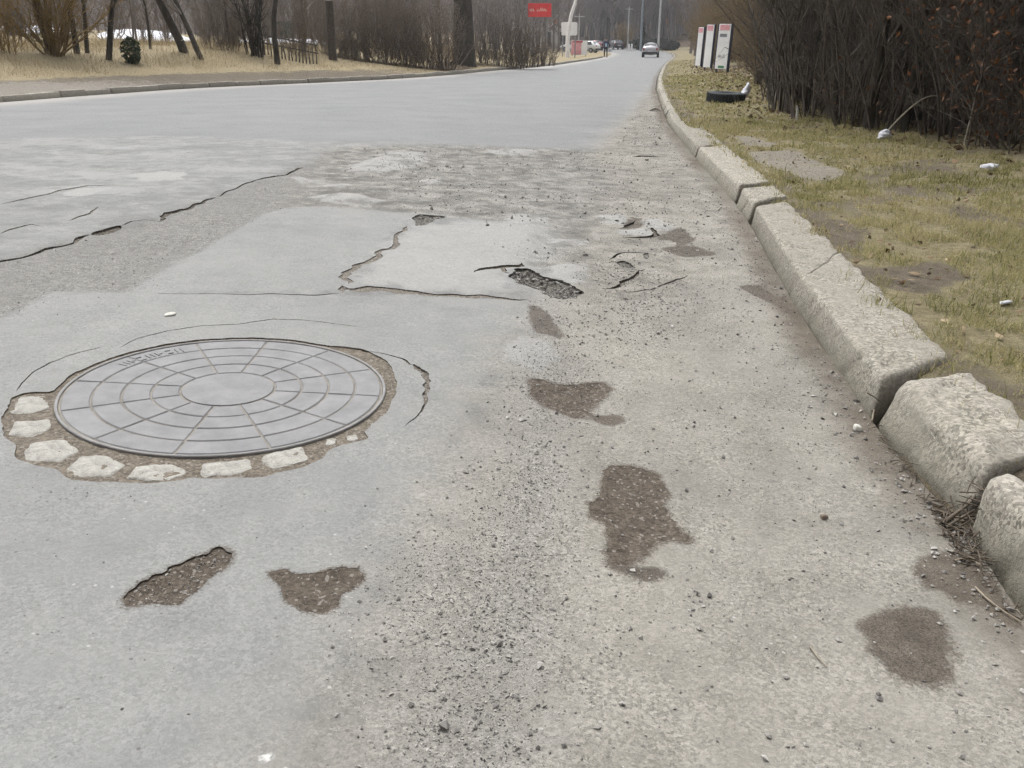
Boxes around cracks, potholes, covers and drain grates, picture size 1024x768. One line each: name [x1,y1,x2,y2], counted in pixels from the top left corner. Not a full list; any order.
crack [0,167,303,262]
crack [604,221,688,292]
crack [362,350,431,427]
manhole cover [1,337,397,483]
crack [121,319,364,347]
crack [474,263,524,273]
crack [16,347,100,391]
pothole [123,546,232,607]
crack [339,226,408,283]
pothole [508,268,584,300]
